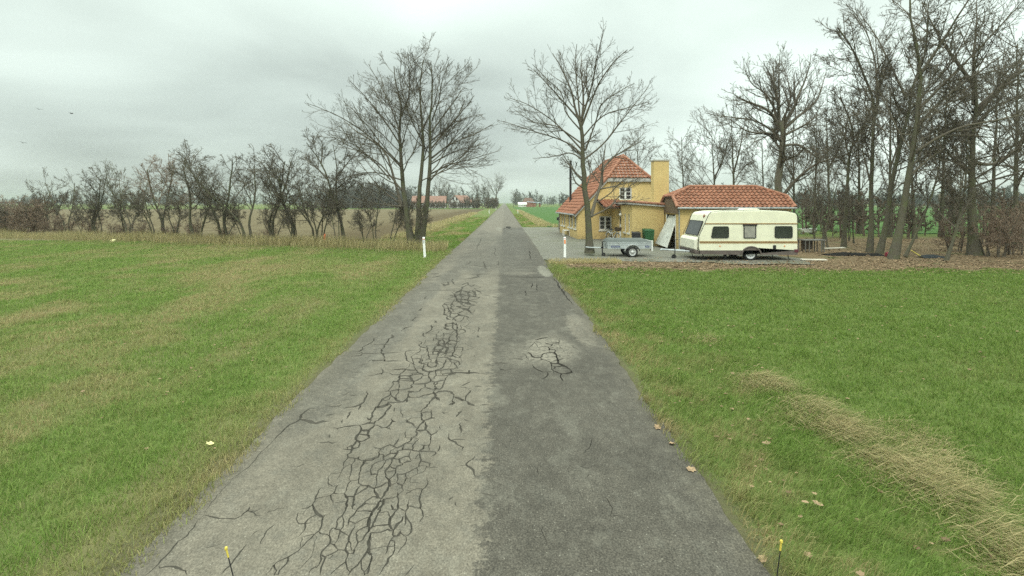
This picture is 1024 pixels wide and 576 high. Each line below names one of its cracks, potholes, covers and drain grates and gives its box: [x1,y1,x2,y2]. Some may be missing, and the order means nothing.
crack [499,337,577,381]
crack [146,233,499,575]
